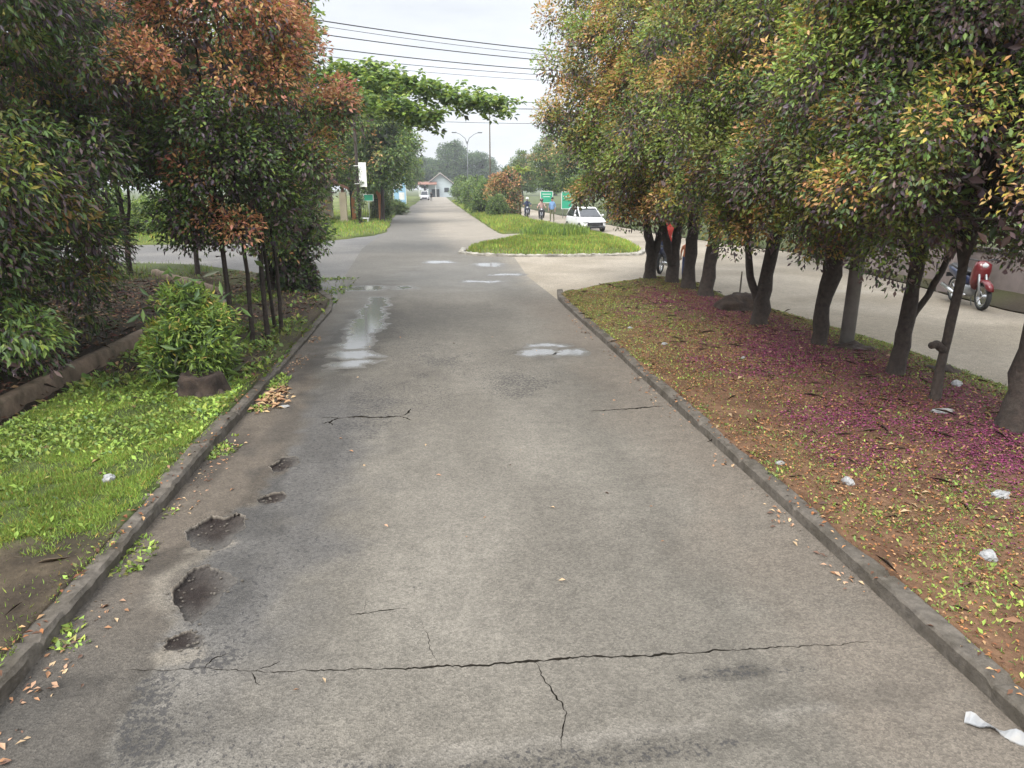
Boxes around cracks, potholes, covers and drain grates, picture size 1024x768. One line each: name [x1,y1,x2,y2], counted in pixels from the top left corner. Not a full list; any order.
pothole [254,491,287,505]
pothole [162,629,205,652]
crack [322,410,410,425]
pothole [166,561,244,625]
pothole [183,512,249,555]
crack [123,631,881,748]
pothole [266,455,302,475]
